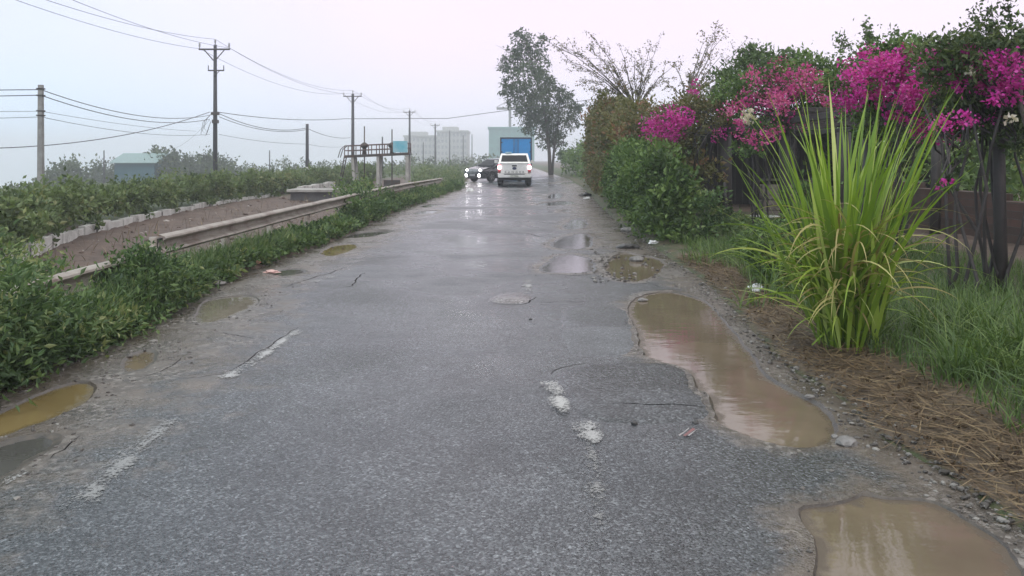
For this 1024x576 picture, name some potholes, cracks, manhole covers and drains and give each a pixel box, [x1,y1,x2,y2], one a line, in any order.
pothole [0,432,64,479]
pothole [539,254,597,273]
pothole [120,349,159,373]
pothole [627,291,839,448]
pothole [798,490,1024,576]
crack [139,328,297,379]
pothole [550,233,594,249]
pothole [0,380,97,437]
pothole [603,251,667,282]
pothole [319,243,359,256]
pothole [194,295,260,323]
